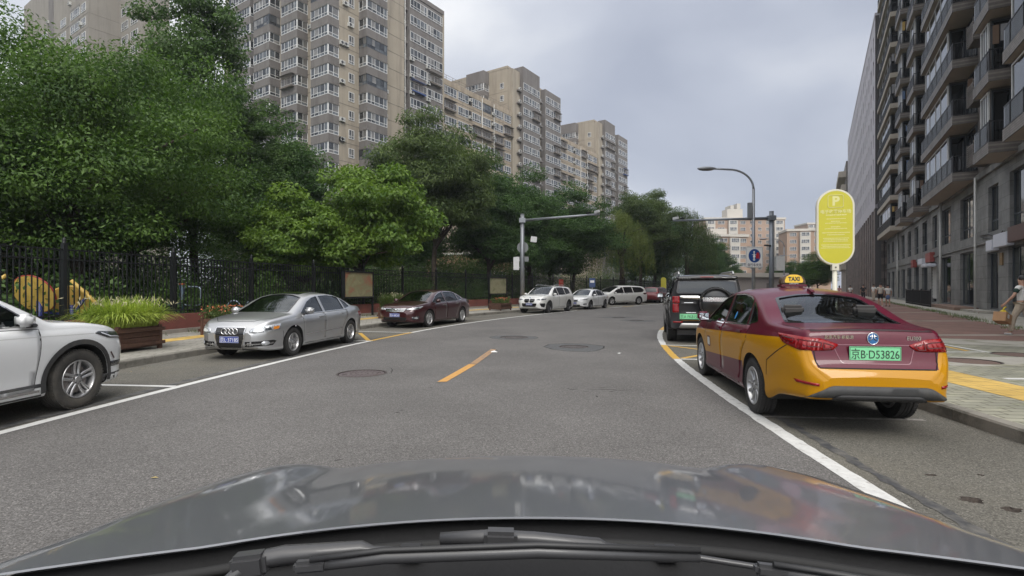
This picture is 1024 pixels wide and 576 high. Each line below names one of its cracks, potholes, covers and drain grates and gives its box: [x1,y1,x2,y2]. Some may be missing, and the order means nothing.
manhole cover [336,369,387,378]
